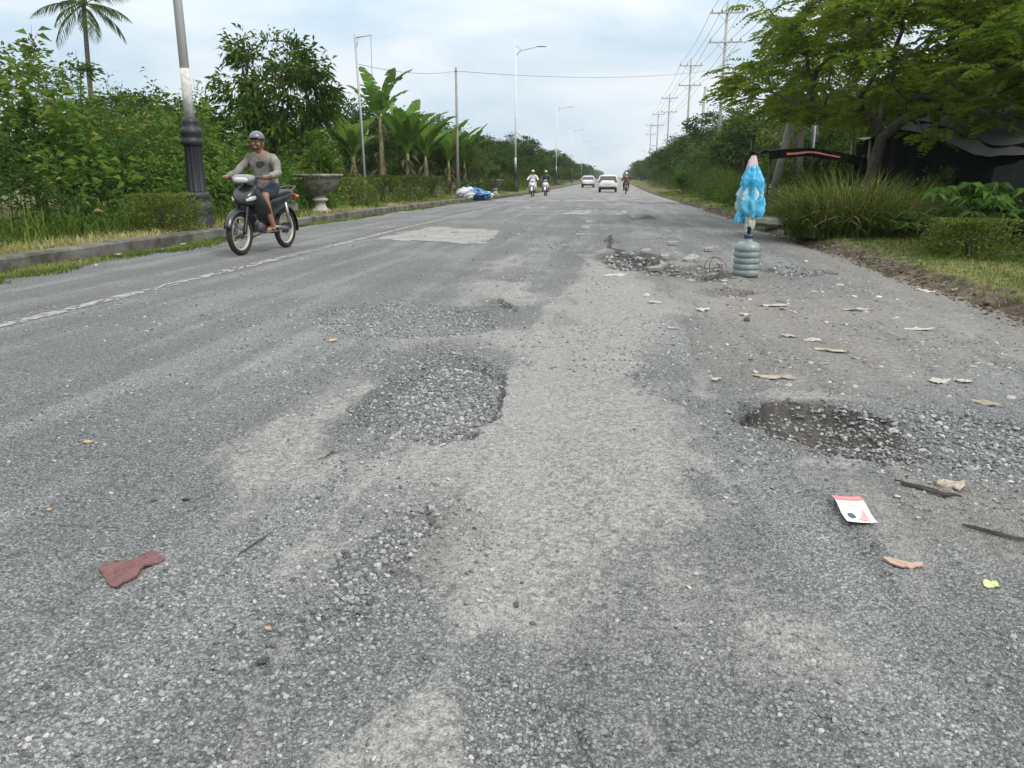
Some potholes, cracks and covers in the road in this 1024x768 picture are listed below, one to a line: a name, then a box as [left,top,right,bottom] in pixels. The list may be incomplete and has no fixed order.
pothole [599,252,737,282]
pothole [343,351,511,446]
pothole [725,397,1024,472]
pothole [302,299,519,342]
